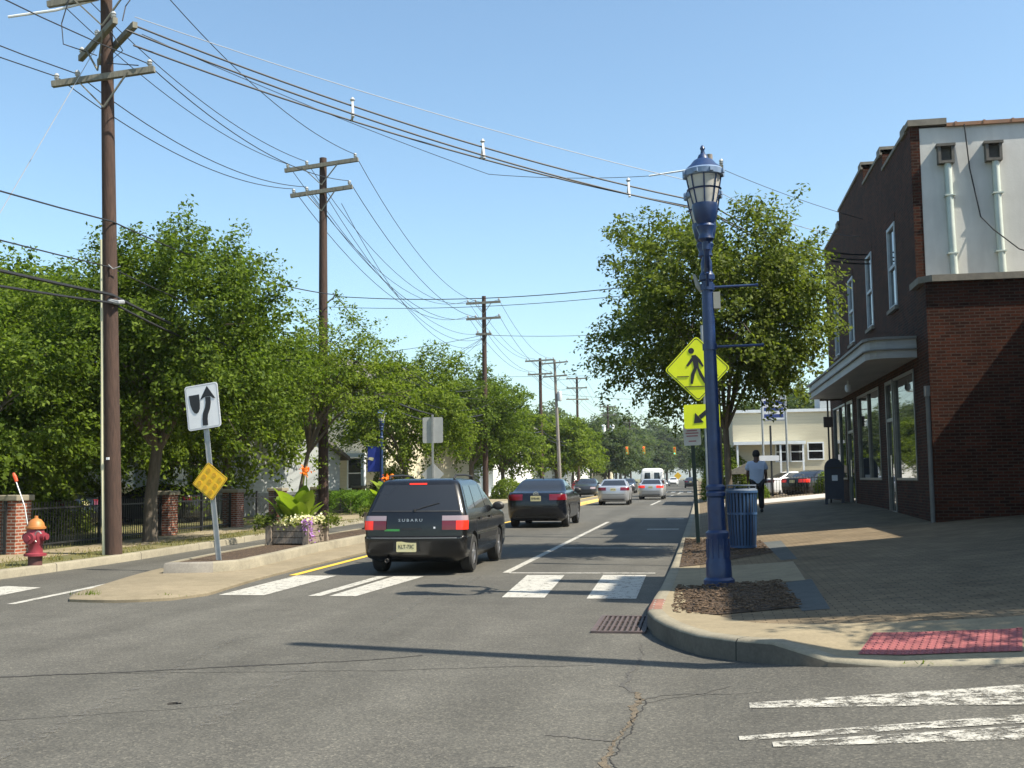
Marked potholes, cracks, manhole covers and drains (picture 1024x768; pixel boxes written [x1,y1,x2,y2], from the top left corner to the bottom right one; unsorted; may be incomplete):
drain grate [591,615,647,634]
